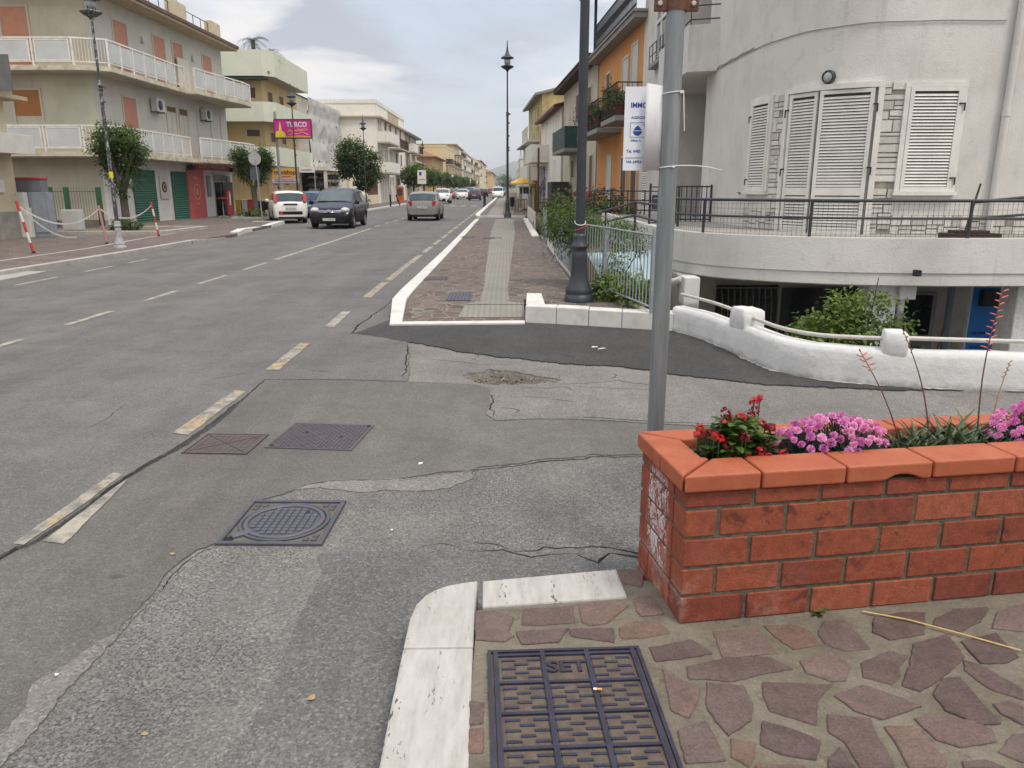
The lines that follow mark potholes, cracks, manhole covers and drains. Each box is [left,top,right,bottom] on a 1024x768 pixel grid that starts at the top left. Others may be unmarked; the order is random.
manhole cover [445,292,473,301]
manhole cover [215,499,346,546]
pothole [457,366,617,391]
manhole cover [181,433,269,455]
manhole cover [264,423,374,451]
crack [426,543,638,563]
manhole cover [487,645,683,768]
crack [441,456,643,475]
